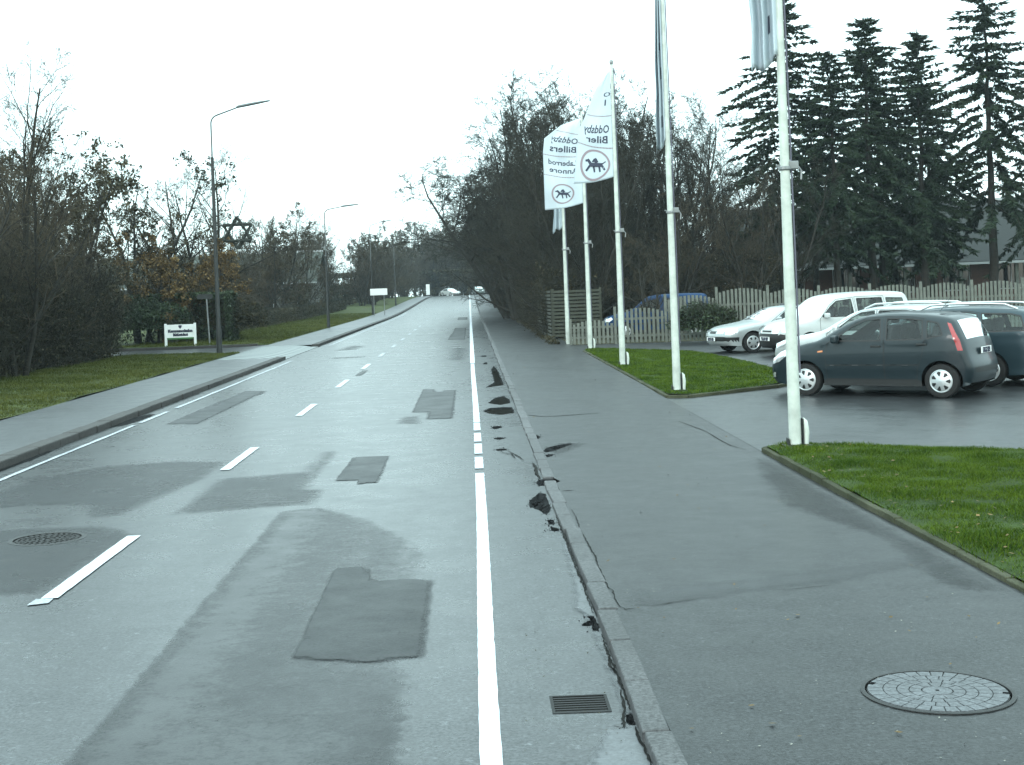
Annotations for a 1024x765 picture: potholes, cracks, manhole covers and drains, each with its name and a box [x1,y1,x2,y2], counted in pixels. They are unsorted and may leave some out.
pothole [486,366,505,388]
pothole [481,407,515,415]
pothole [578,615,600,632]
drain grate [549,694,612,714]
manhole cover [860,670,1017,715]
manhole cover [7,532,87,546]
pothole [489,395,512,405]
pothole [543,443,575,454]
crack [556,509,652,765]
pothole [526,493,552,515]
